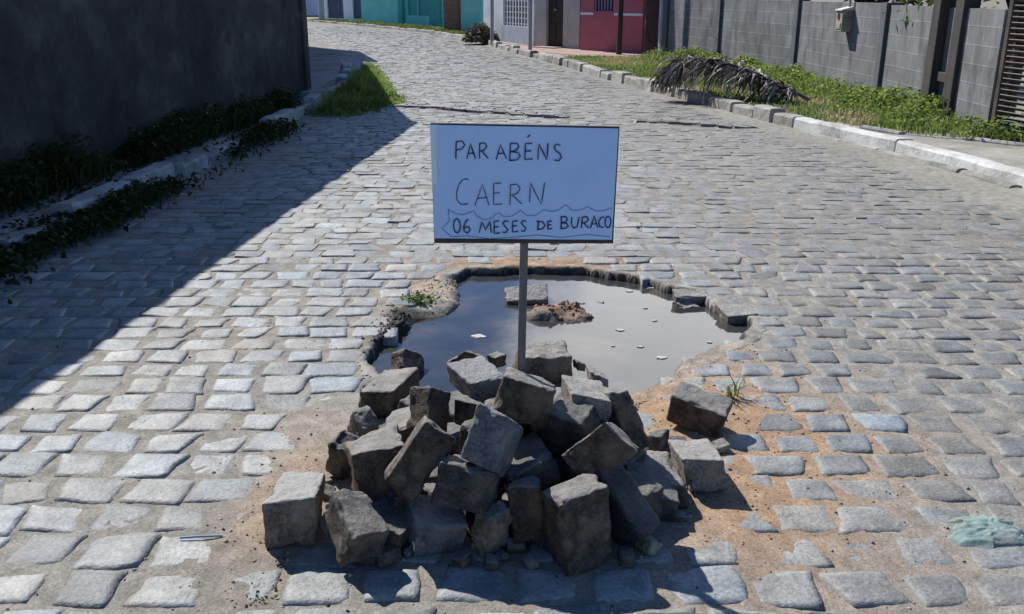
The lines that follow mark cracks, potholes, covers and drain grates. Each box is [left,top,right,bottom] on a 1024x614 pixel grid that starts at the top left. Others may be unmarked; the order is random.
pothole [355,263,767,407]
